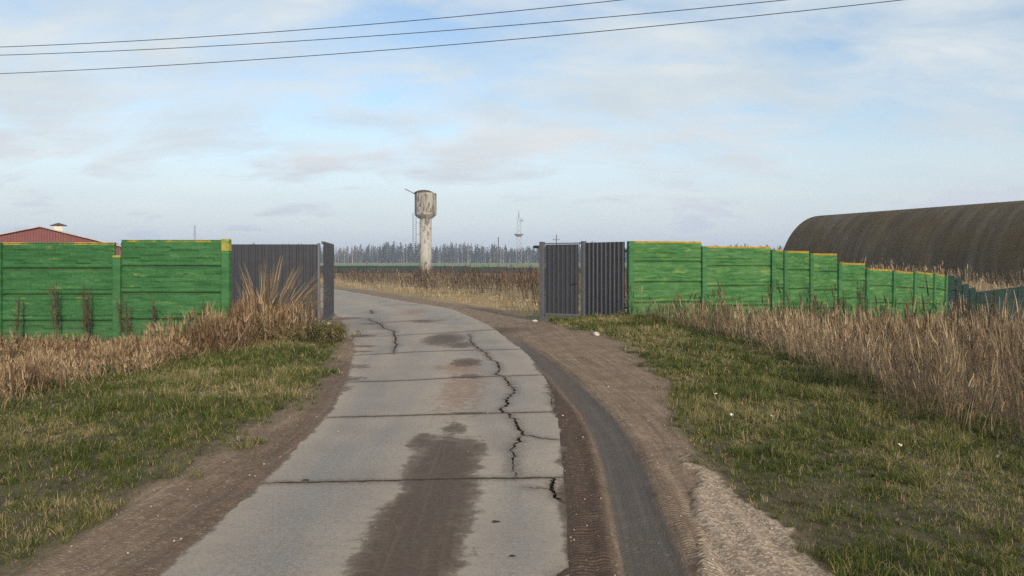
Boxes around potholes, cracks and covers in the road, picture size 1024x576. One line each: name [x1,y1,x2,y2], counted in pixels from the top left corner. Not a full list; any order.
crack [275,310,563,500]
